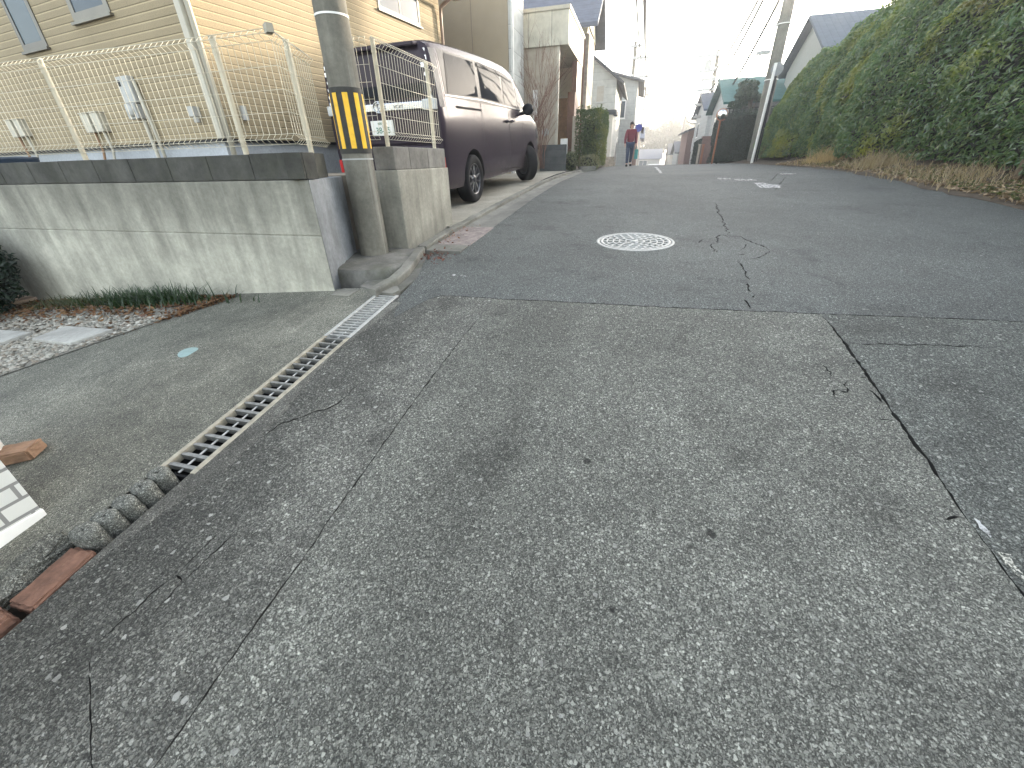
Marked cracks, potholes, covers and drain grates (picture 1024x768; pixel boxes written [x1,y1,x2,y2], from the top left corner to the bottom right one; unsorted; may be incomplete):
crack [823,318,1024,597]
drain grate [160,295,399,481]
crack [699,204,770,308]
manhole cover [596,233,675,251]
crack [88,302,492,768]
